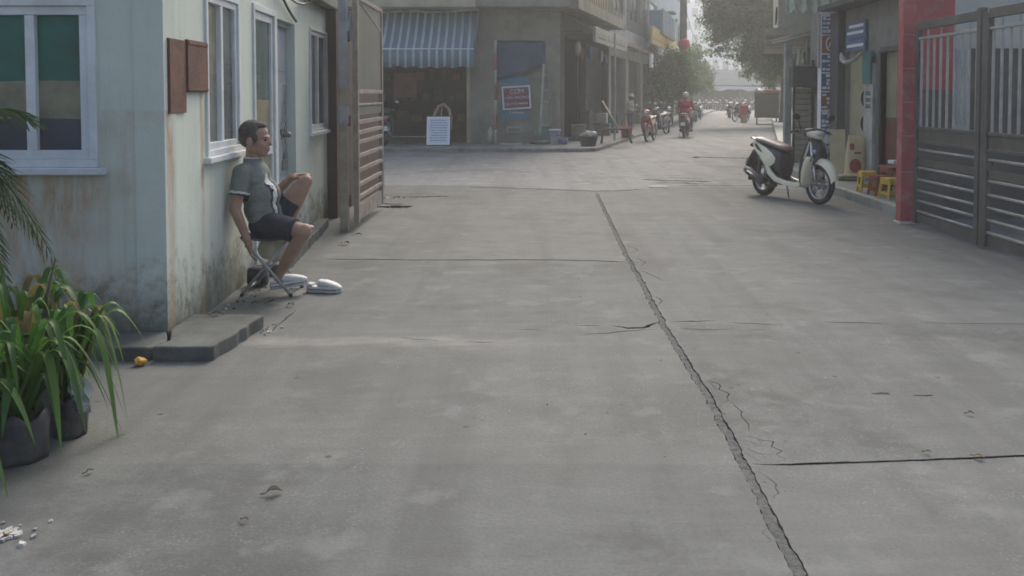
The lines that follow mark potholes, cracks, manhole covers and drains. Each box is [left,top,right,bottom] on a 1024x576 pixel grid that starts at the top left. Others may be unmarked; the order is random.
crack [338,178,1024,576]
